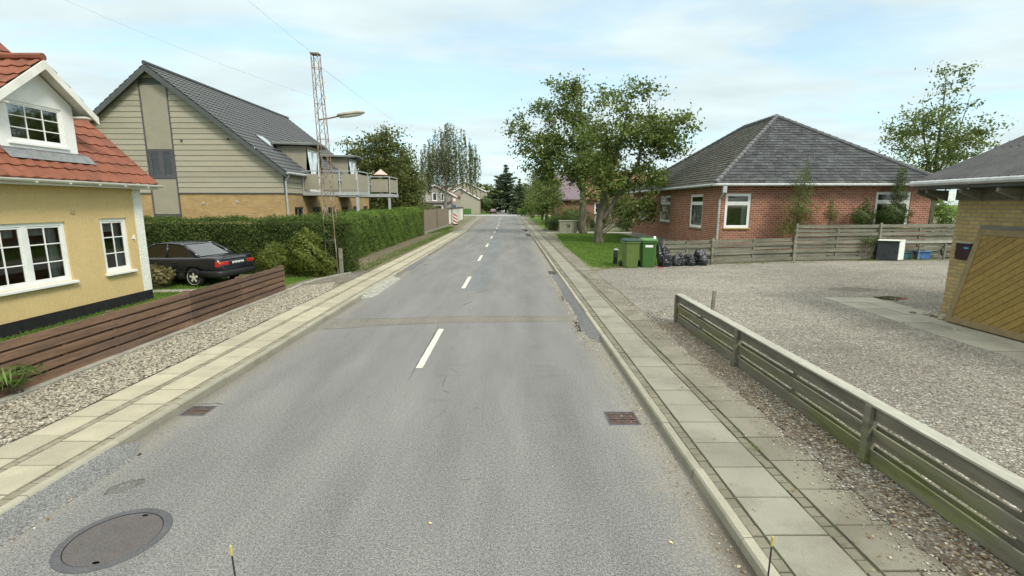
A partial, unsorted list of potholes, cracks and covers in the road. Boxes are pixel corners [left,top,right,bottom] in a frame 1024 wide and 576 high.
drain grate [178,406,217,416]
manhole cover [50,508,173,574]
drain grate [603,411,642,425]
crack [330,292,479,382]
